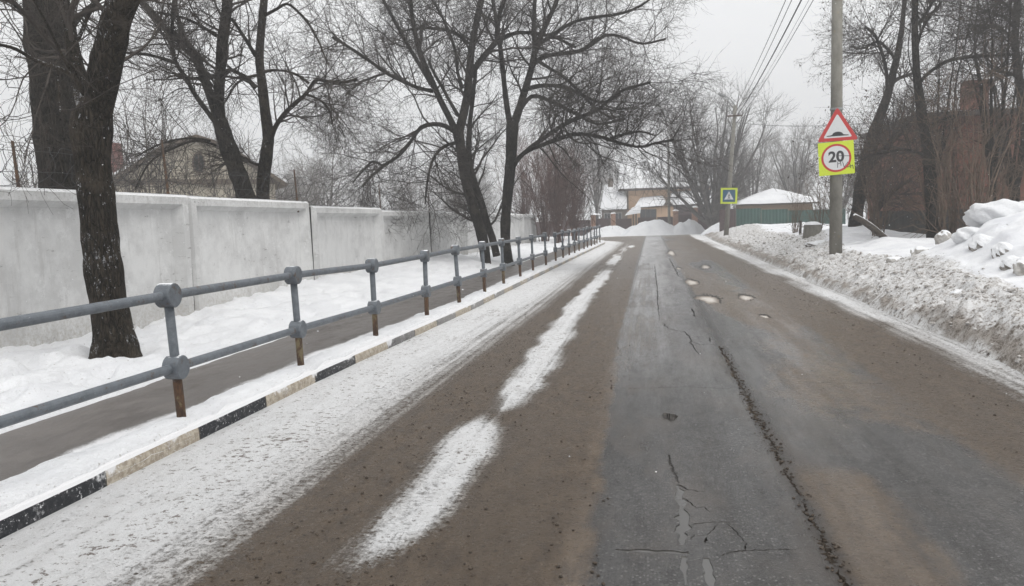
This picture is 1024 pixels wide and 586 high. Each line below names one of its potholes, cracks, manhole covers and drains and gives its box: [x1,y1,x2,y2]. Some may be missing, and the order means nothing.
pothole [692,293,724,305]
crack [634,256,716,355]
crack [615,453,795,586]
